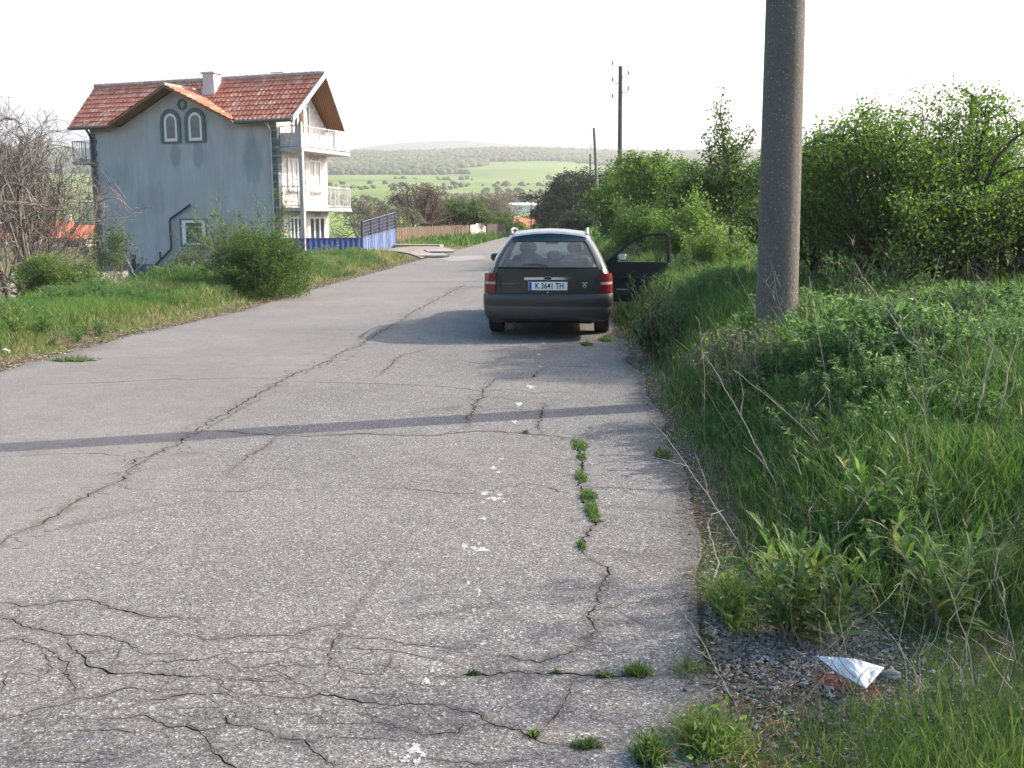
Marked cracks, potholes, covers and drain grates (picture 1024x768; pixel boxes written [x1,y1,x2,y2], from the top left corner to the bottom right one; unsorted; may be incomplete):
crack [1,286,470,549]
crack [227,344,575,466]
crack [436,439,672,732]
